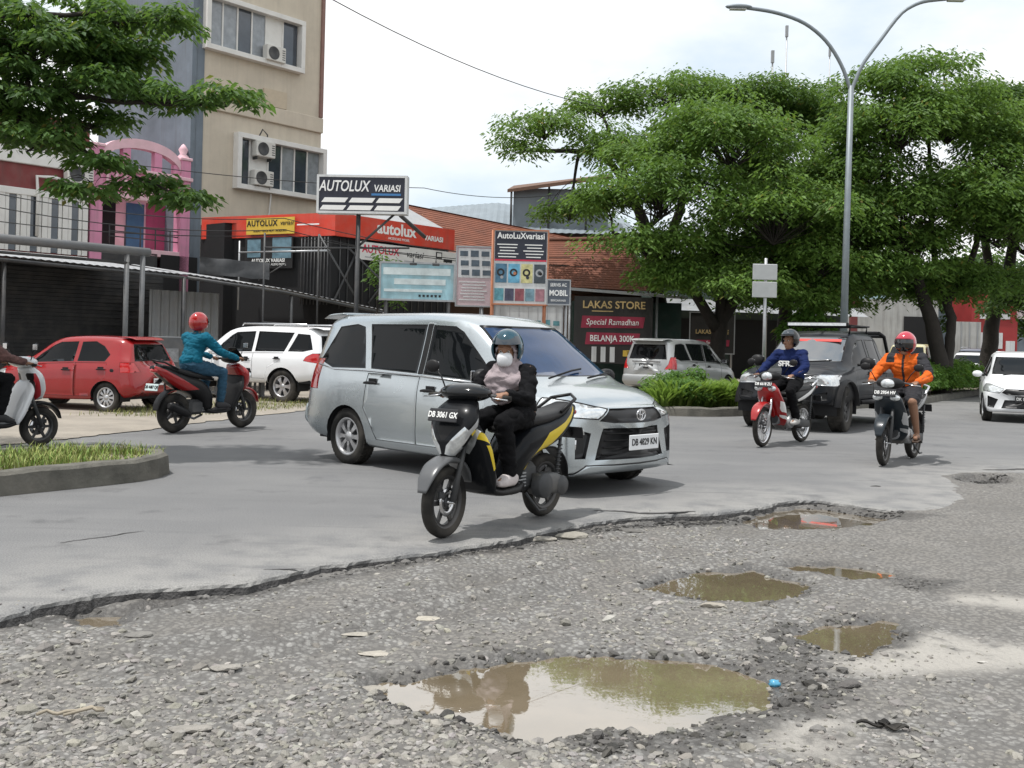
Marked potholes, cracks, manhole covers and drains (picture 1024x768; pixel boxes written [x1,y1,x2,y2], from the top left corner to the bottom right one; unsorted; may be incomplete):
pothole [735,505,910,530]
pothole [789,612,918,661]
pothole [949,473,1016,484]
pothole [635,563,830,604]
pothole [771,559,908,580]
pothole [349,645,804,745]
